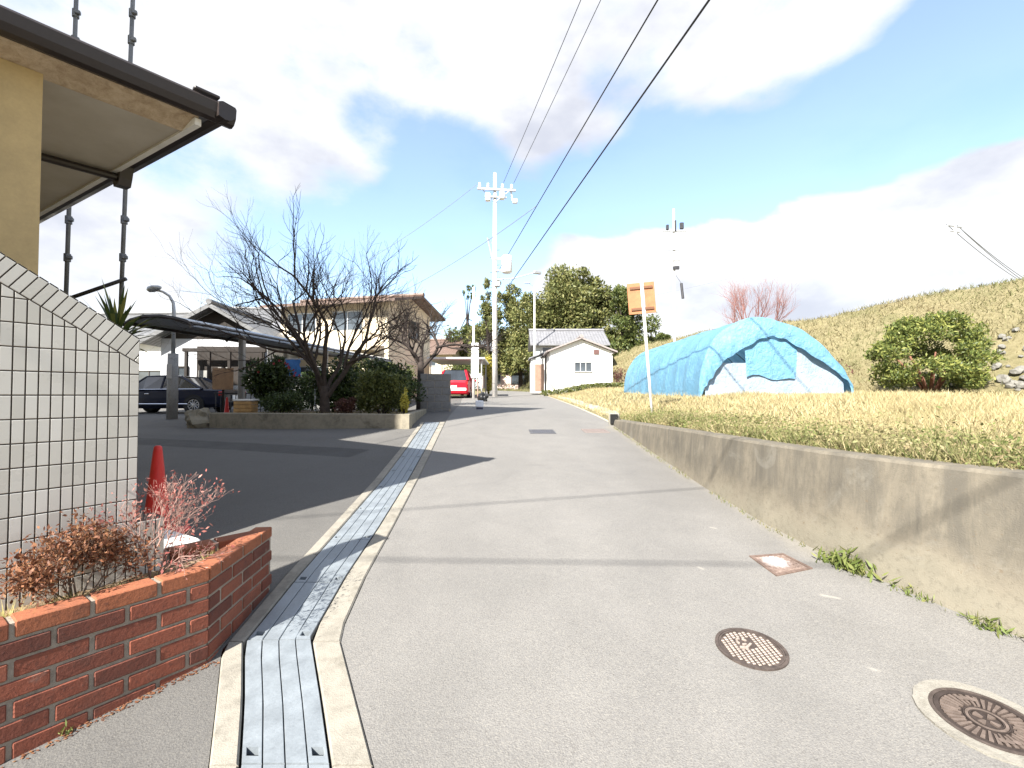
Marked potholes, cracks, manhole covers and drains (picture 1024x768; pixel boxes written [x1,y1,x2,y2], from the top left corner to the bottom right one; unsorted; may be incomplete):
manhole cover [912,679,1024,768]
manhole cover [749,553,813,577]
manhole cover [715,628,790,671]
